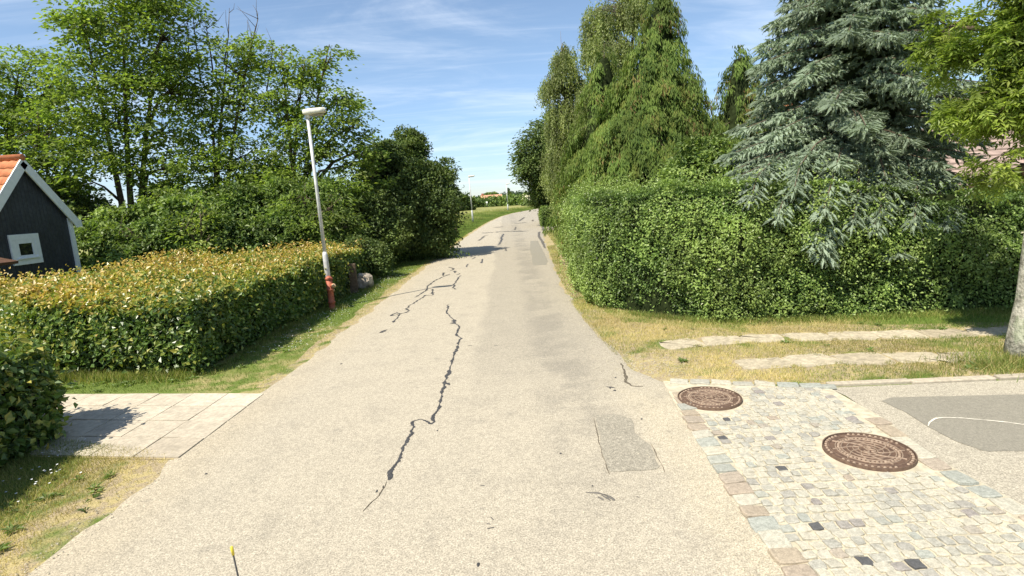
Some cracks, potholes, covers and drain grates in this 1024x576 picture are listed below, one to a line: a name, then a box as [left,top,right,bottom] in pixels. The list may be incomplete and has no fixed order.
crack [478,217,534,251]
crack [620,363,643,387]
manhole cover [822,432,918,472]
manhole cover [677,386,743,411]
